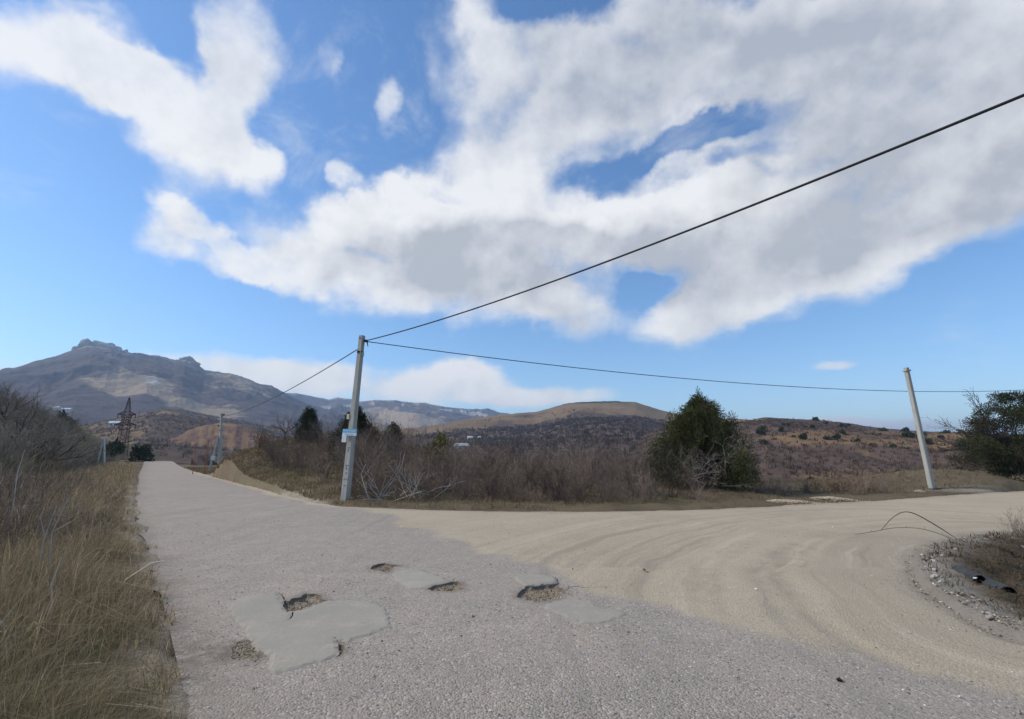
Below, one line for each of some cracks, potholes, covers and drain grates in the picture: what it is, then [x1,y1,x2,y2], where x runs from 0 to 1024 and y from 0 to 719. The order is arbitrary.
pothole [371,563,399,572]
pothole [283,594,327,612]
pothole [428,582,463,591]
pothole [231,640,262,660]
pothole [517,585,565,602]
